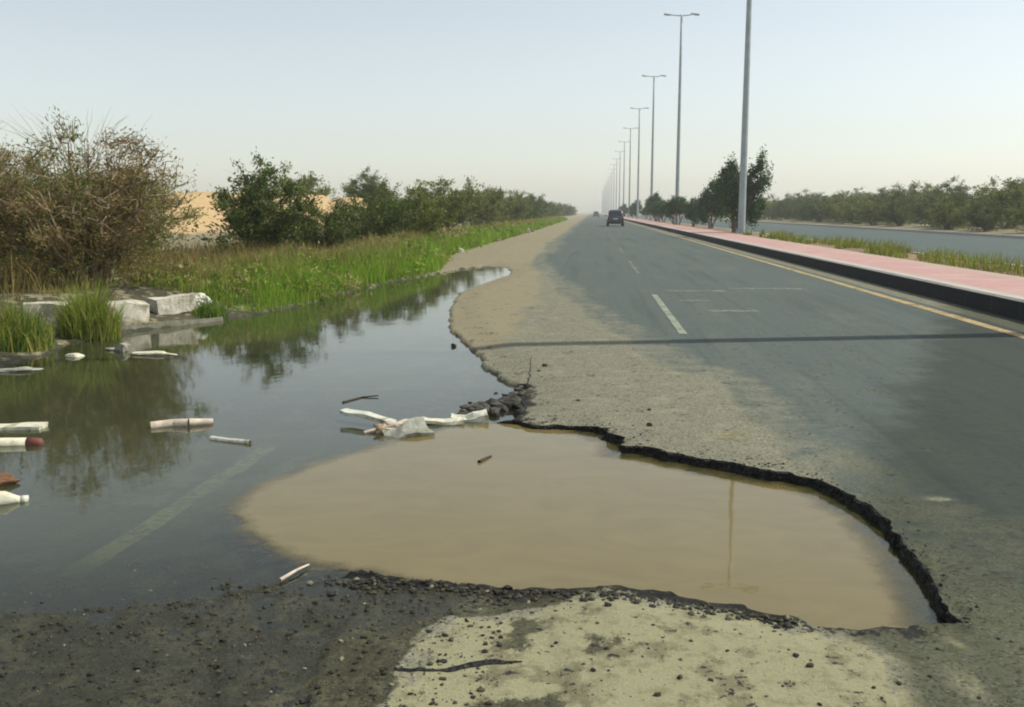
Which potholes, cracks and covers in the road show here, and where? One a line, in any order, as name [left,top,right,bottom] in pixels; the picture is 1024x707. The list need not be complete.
crack [394,659,522,671]
pothole [223,419,963,630]
